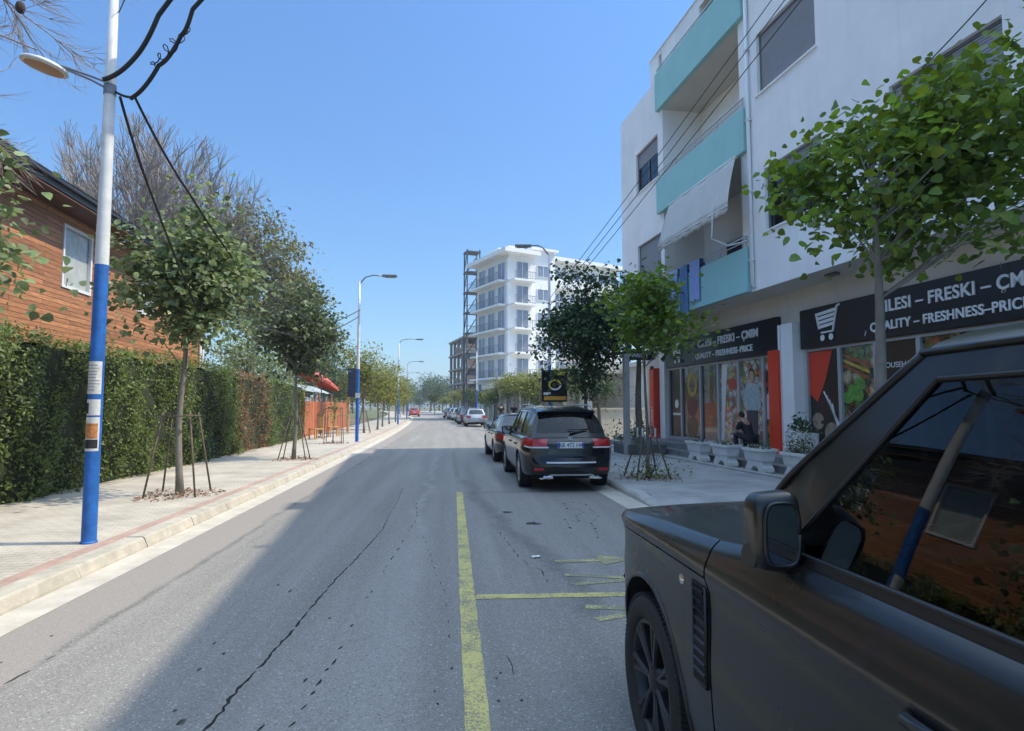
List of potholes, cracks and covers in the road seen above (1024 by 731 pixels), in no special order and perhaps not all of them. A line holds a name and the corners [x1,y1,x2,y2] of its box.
crack [203,490,450,731]
